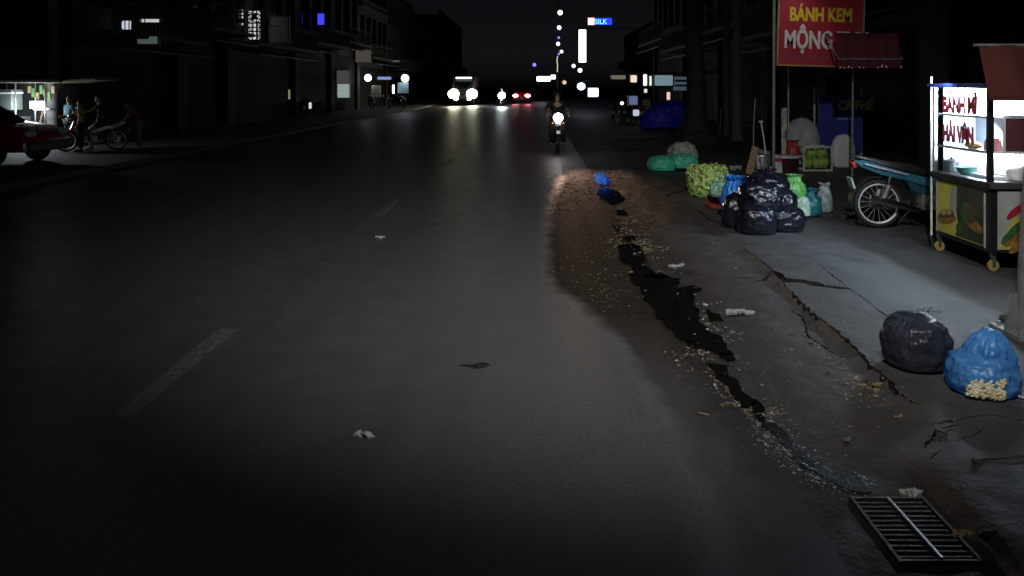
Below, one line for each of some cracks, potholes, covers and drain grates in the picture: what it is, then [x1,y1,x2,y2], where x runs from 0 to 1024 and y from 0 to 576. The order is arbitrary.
crack [923,414,1023,459]
drain grate [849,495,985,567]
crack [726,248,922,406]
